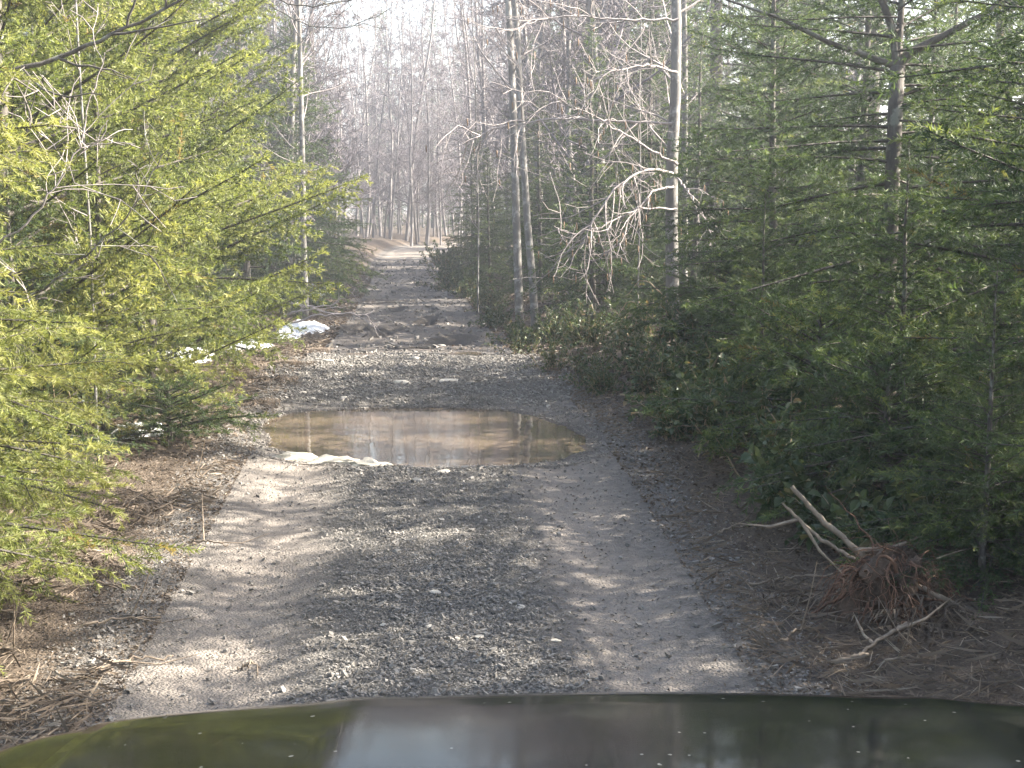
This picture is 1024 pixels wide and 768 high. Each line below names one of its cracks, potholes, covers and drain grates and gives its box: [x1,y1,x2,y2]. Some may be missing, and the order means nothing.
pothole [423,333,479,346]
pothole [218,396,627,469]
pothole [411,315,439,326]
pothole [367,324,407,338]
pothole [338,323,369,334]
